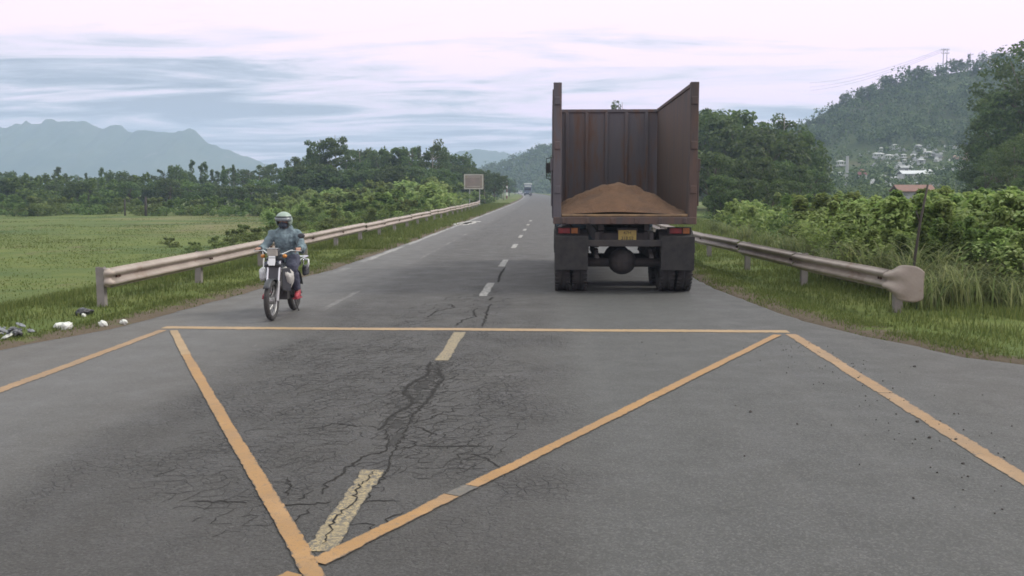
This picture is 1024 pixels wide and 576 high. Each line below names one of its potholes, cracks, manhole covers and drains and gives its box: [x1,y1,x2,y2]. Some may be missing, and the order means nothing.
crack [130,337,526,543]
crack [394,284,517,327]
